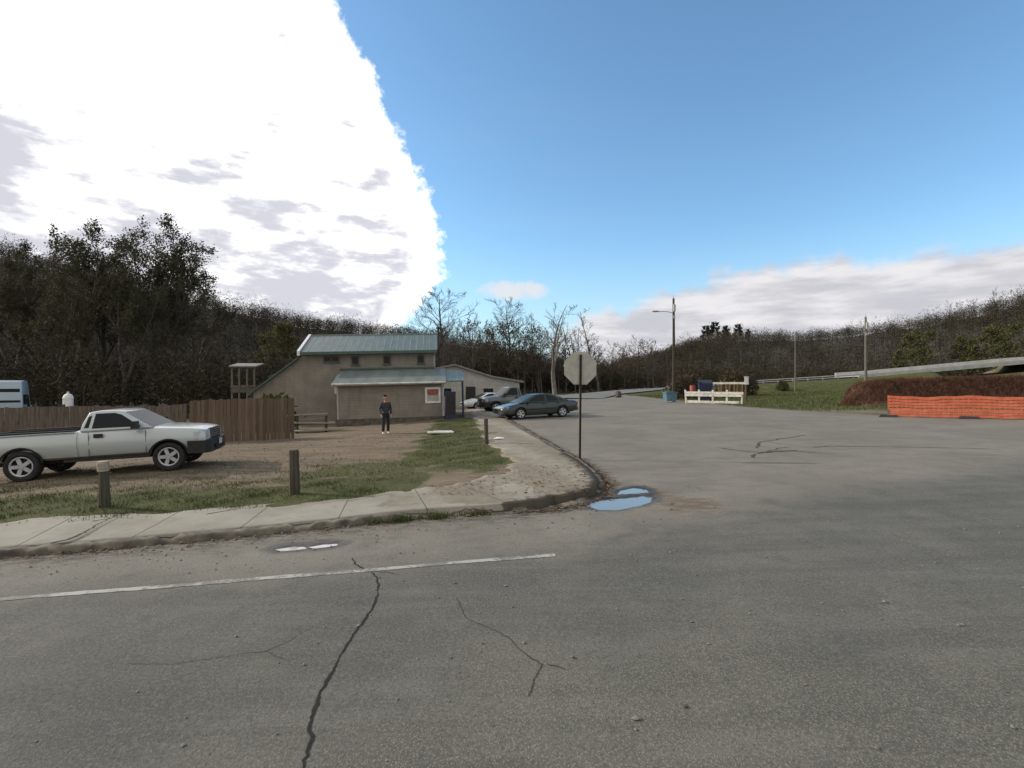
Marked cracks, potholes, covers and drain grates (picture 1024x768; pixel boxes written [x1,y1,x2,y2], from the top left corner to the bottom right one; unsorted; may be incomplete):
crack [132,558,394,768]
crack [457,599,568,697]
crack [723,435,977,457]
